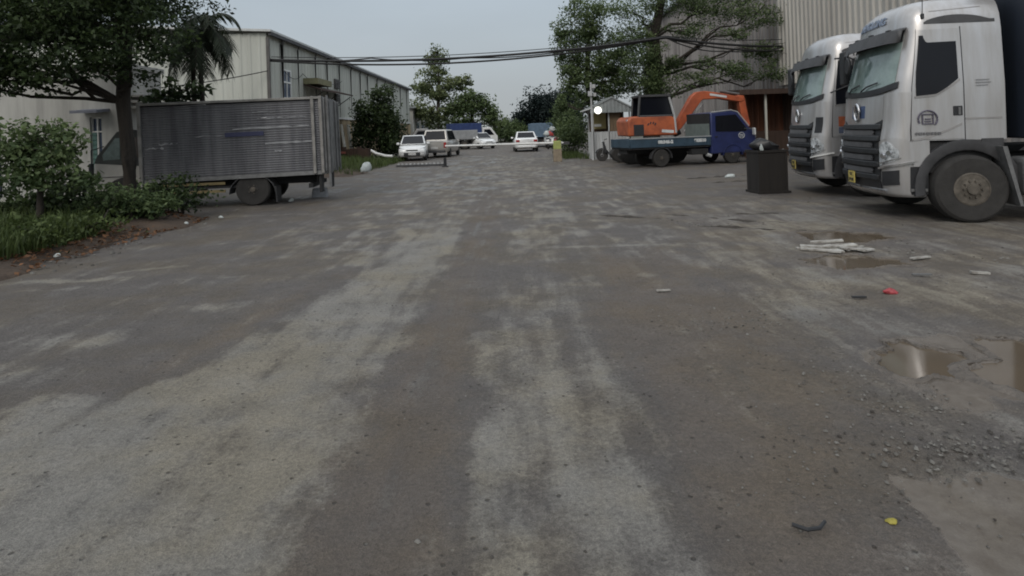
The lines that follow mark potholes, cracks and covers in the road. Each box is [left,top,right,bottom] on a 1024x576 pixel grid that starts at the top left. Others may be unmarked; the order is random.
pothole [788,230,907,245]
pothole [791,253,926,272]
pothole [947,332,1024,400]
pothole [868,336,984,383]
